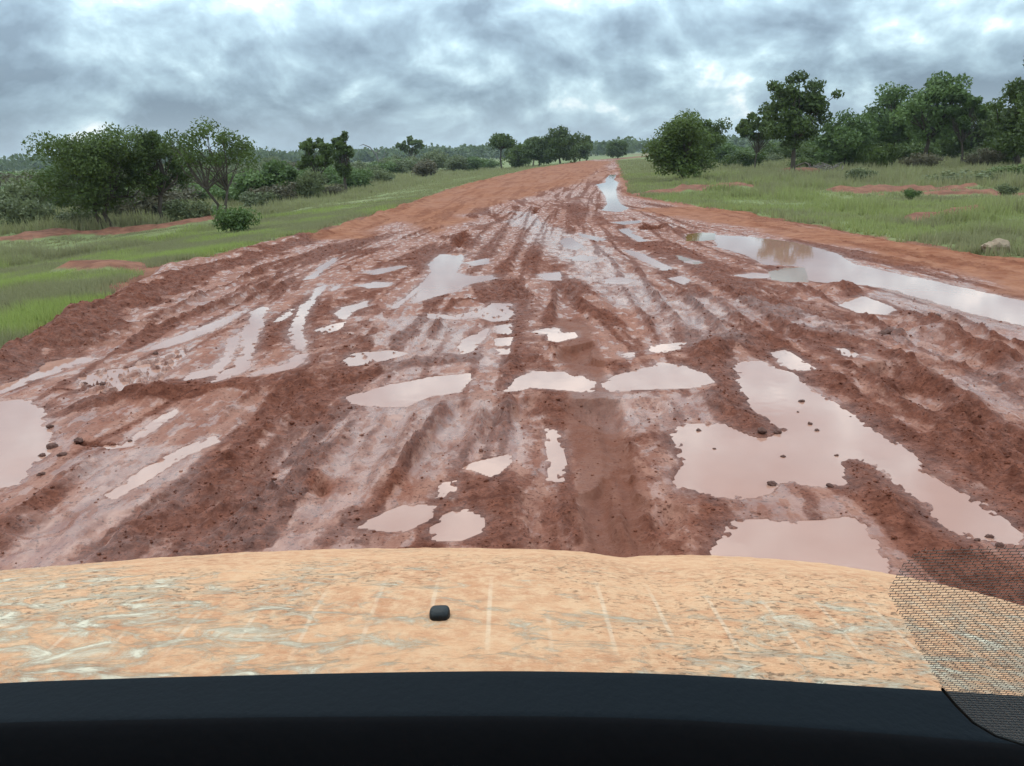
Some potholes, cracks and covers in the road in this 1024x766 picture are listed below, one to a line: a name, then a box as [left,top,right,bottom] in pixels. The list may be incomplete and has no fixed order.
pothole [666,359,1024,546]
pothole [768,267,809,282]
pothole [0,398,63,492]
pothole [353,502,439,533]
pothole [420,505,489,542]
pothole [597,361,717,392]
pothole [343,372,474,408]
pothole [707,515,895,575]
pothole [685,232,717,241]
